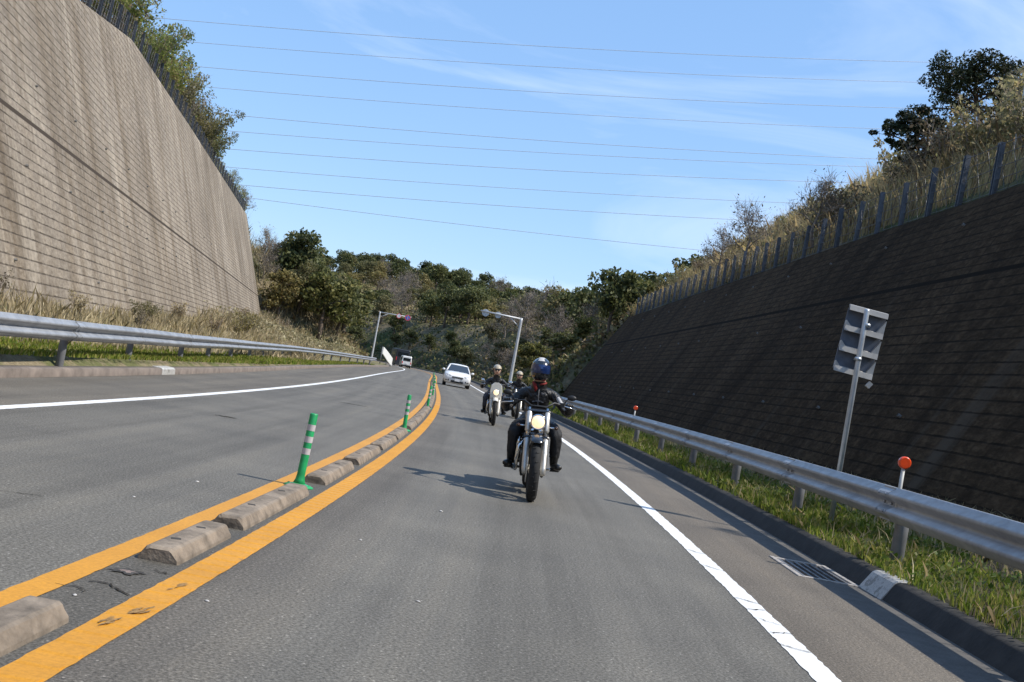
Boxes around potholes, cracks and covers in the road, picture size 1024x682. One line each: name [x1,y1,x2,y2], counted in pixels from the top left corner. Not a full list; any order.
crack [58,580,129,595]
drain grate [769,555,861,588]
